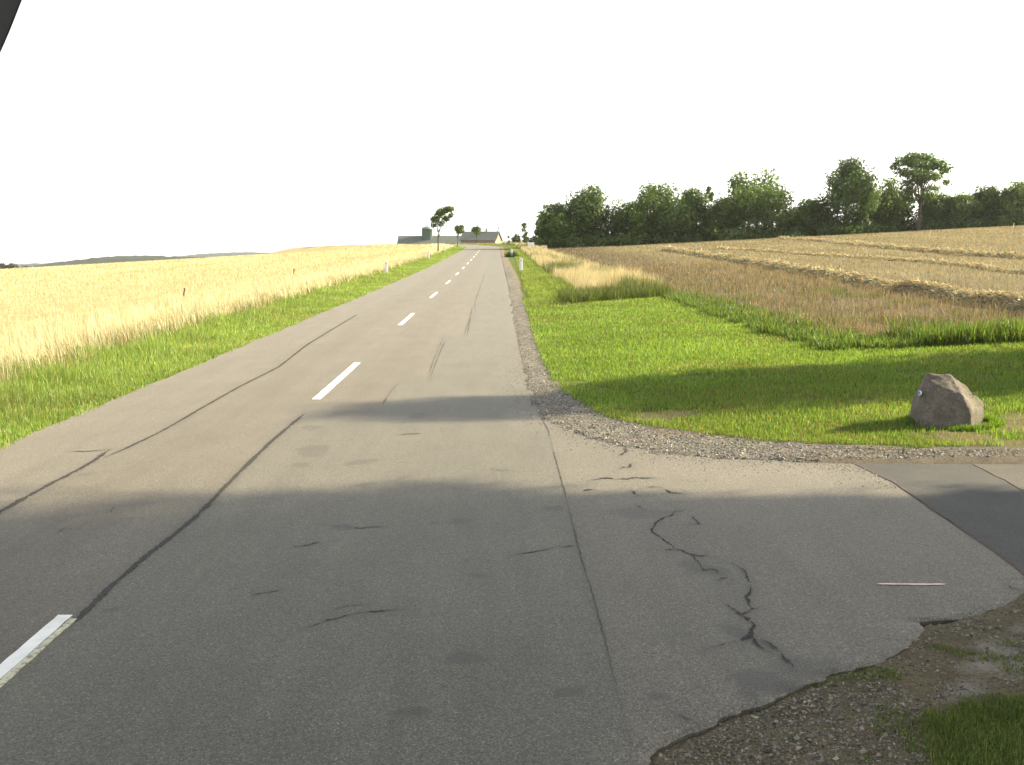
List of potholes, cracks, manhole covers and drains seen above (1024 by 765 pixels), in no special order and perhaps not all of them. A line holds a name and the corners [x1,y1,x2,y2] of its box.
crack [305,604,396,628]
crack [585,446,795,668]
